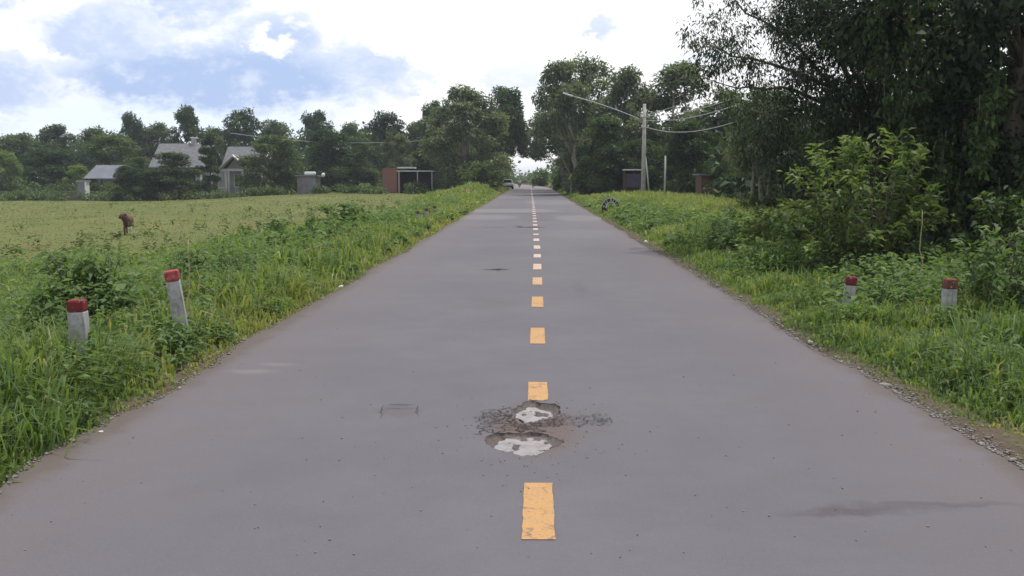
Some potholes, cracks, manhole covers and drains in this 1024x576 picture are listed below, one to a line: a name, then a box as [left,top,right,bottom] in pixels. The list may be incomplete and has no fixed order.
pothole [511,401,561,423]
crack [475,407,612,434]
pothole [484,432,564,456]
